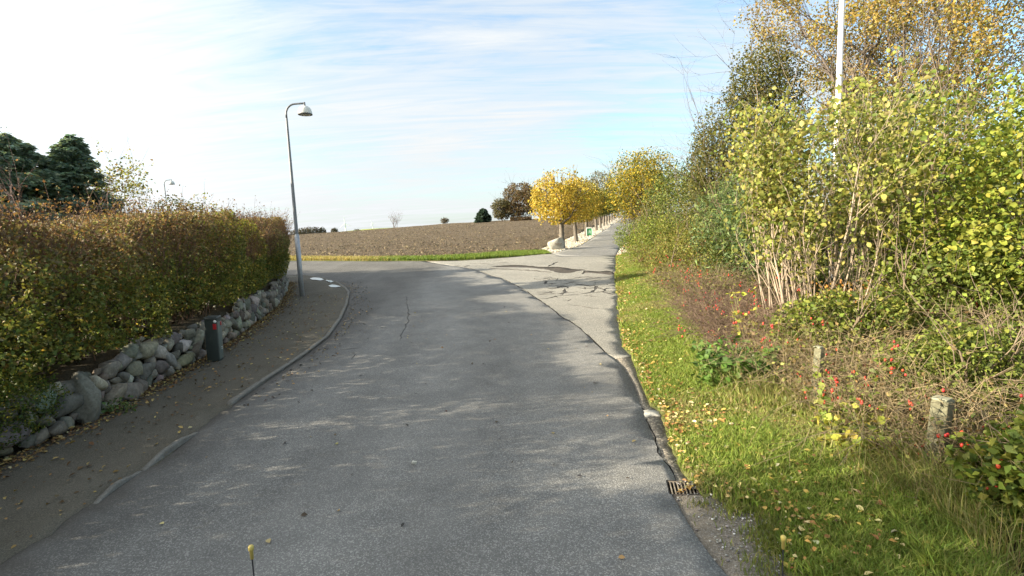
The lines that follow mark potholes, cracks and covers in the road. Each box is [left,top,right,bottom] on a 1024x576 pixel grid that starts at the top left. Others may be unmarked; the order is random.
crack [469,262,615,308]
drain grate [666,480,699,496]
